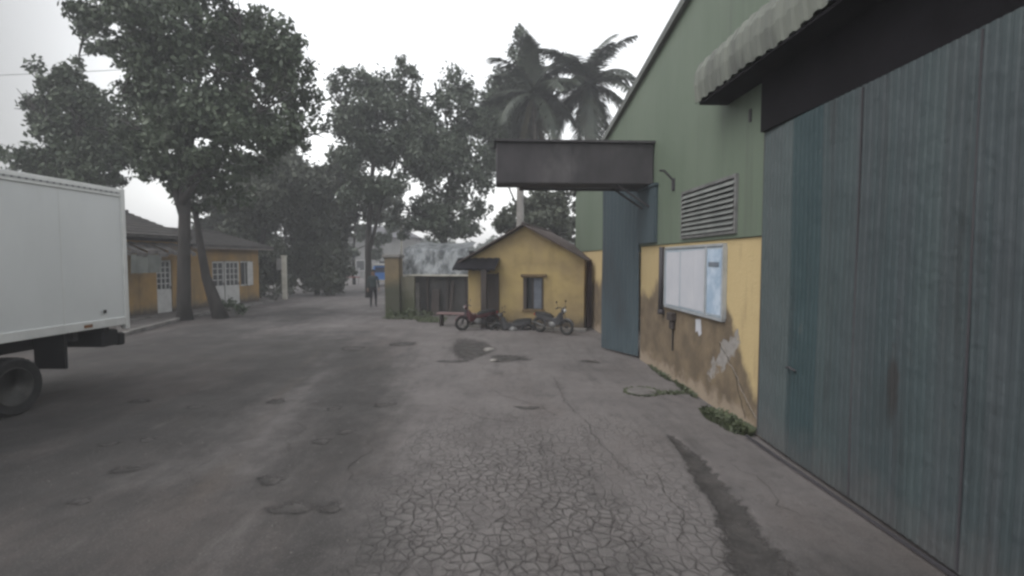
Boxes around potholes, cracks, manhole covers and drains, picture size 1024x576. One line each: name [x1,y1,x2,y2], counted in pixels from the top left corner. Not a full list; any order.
crack [390,360,672,576]
pothole [320,502,340,513]
pothole [265,500,317,514]
pothole [452,339,493,362]
manhole cover [628,387,657,395]
pothole [257,475,283,486]
